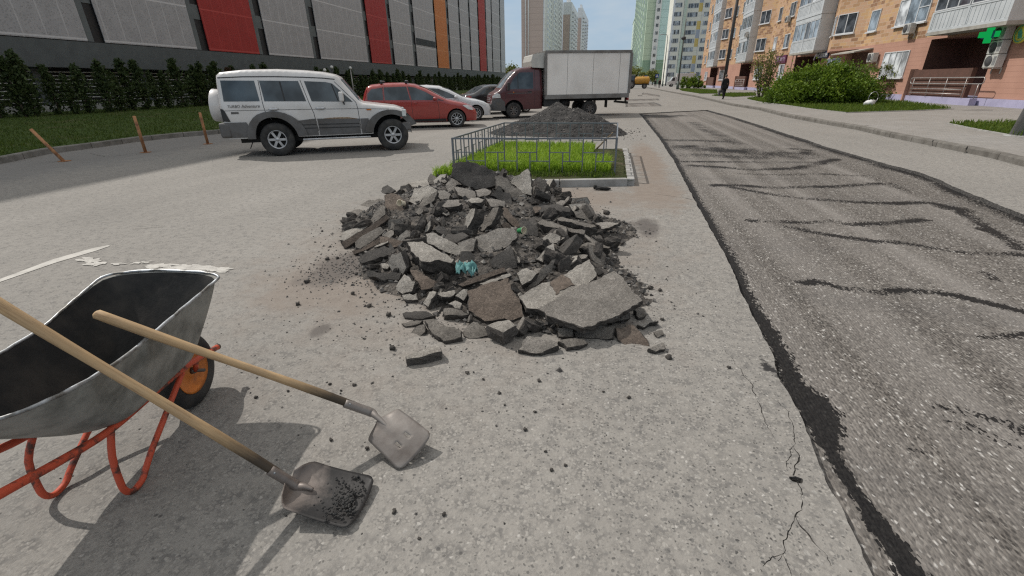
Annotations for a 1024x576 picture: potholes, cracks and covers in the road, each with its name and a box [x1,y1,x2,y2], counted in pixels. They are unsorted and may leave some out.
crack [725,351,831,576]
